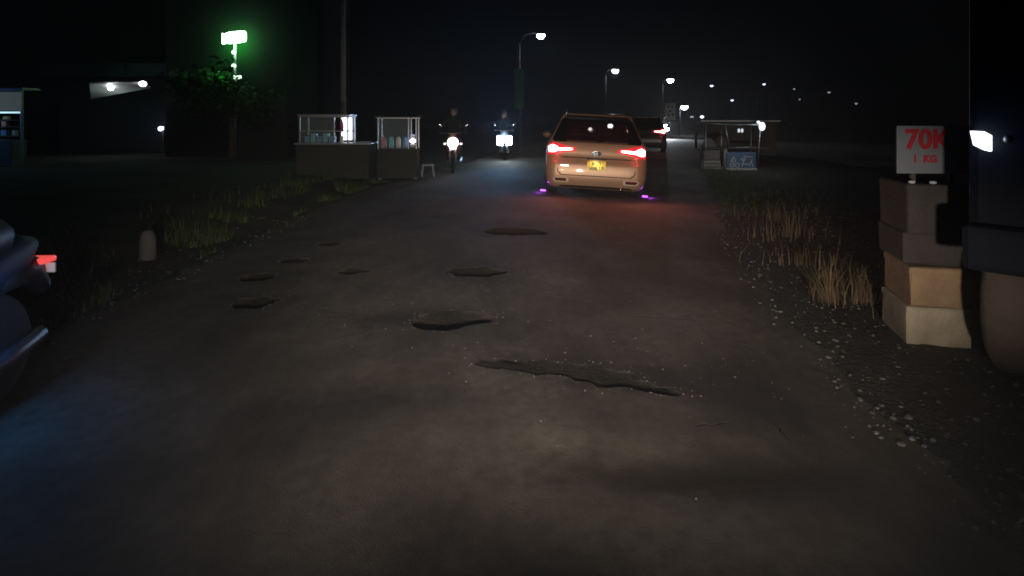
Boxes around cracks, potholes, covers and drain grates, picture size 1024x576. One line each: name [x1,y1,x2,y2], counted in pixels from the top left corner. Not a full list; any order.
pothole [409,310,496,331]
pothole [240,273,275,282]
pothole [484,228,547,236]
pothole [472,359,684,397]
crack [768,418,792,442]
pothole [231,296,280,309]
pothole [444,266,508,277]
